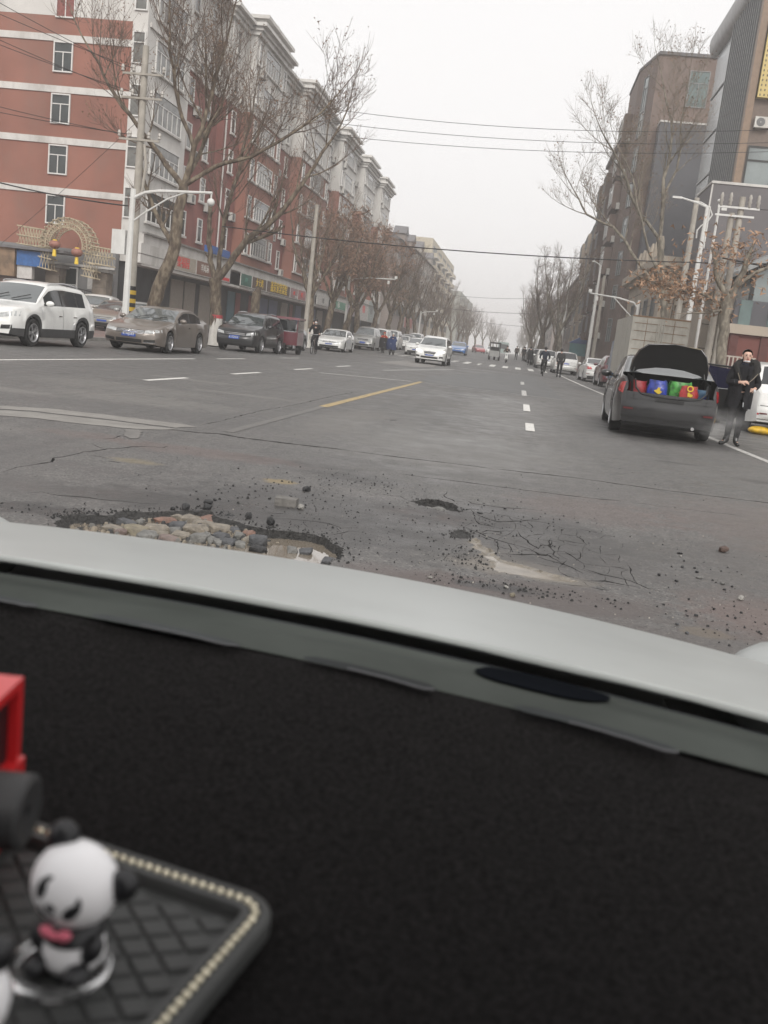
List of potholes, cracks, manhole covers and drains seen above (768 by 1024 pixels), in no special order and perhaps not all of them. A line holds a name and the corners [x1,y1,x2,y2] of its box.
crack [4,435,167,472]
pothole [54,510,344,566]
pothole [412,499,462,512]
crack [405,474,740,591]
